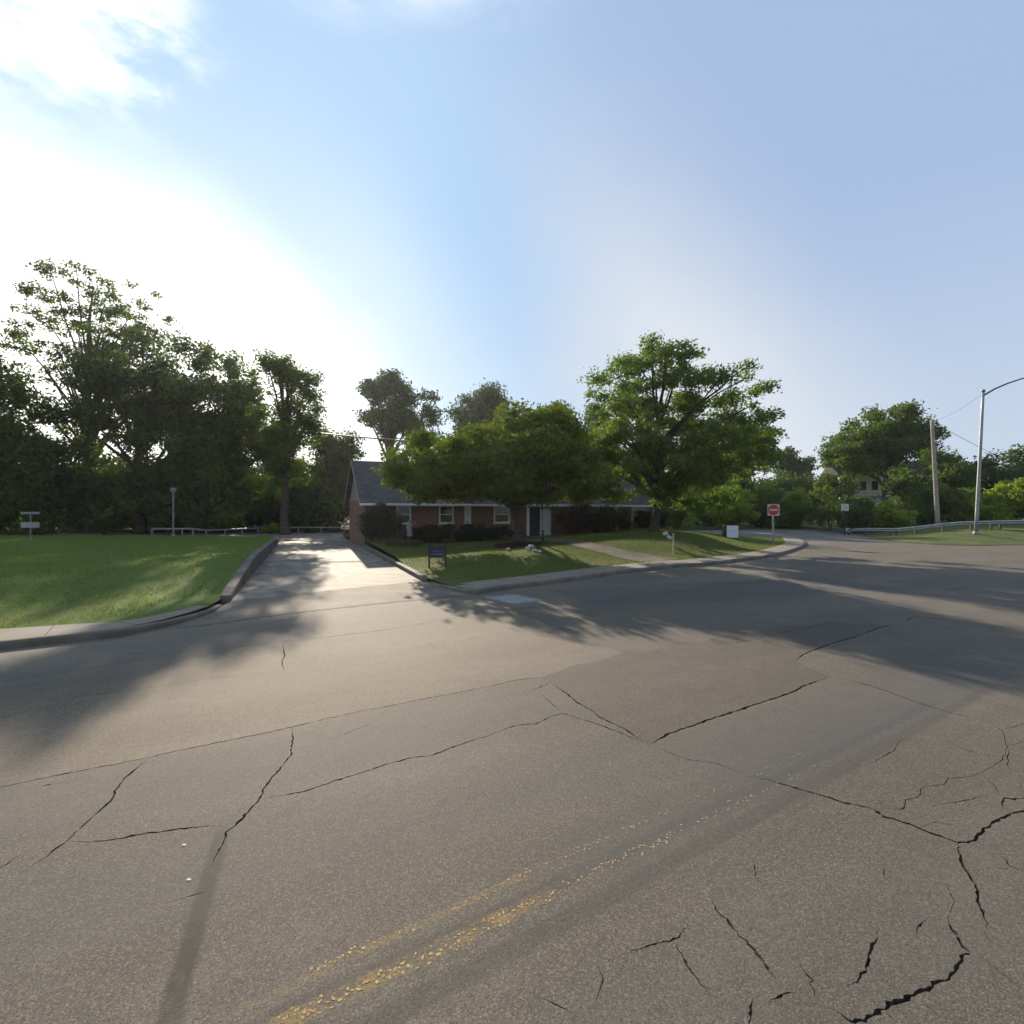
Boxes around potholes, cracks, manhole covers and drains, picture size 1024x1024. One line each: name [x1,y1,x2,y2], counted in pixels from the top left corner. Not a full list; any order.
crack [0,676,829,871]
crack [626,676,1024,1024]
crack [734,617,978,661]
crack [531,964,604,1017]
